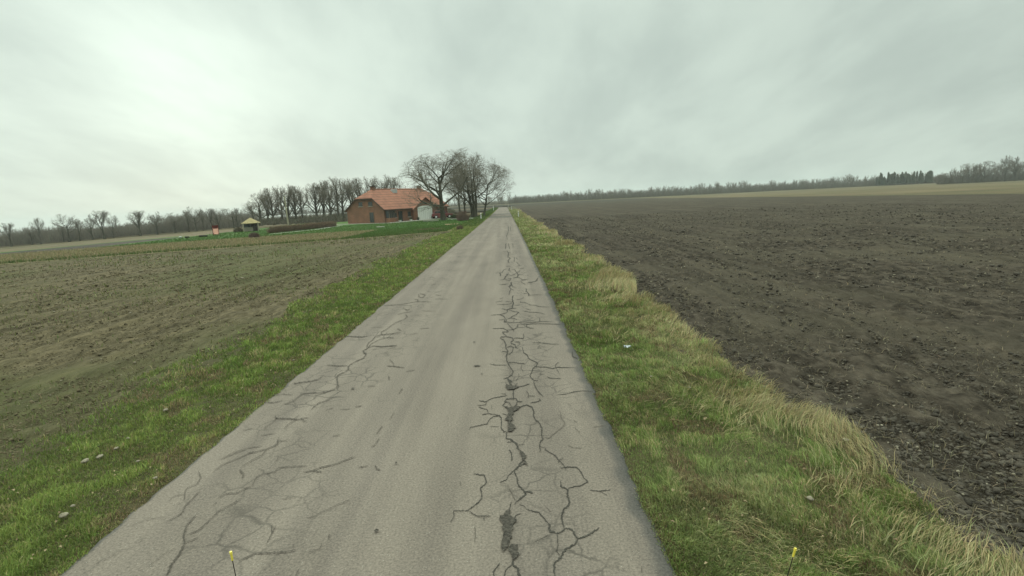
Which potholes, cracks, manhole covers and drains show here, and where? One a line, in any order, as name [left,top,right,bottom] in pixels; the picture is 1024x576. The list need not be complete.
pothole [508,544,519,559]
pothole [499,509,517,551]
pothole [505,406,521,421]
crack [450,226,607,575]
crack [95,291,445,575]
